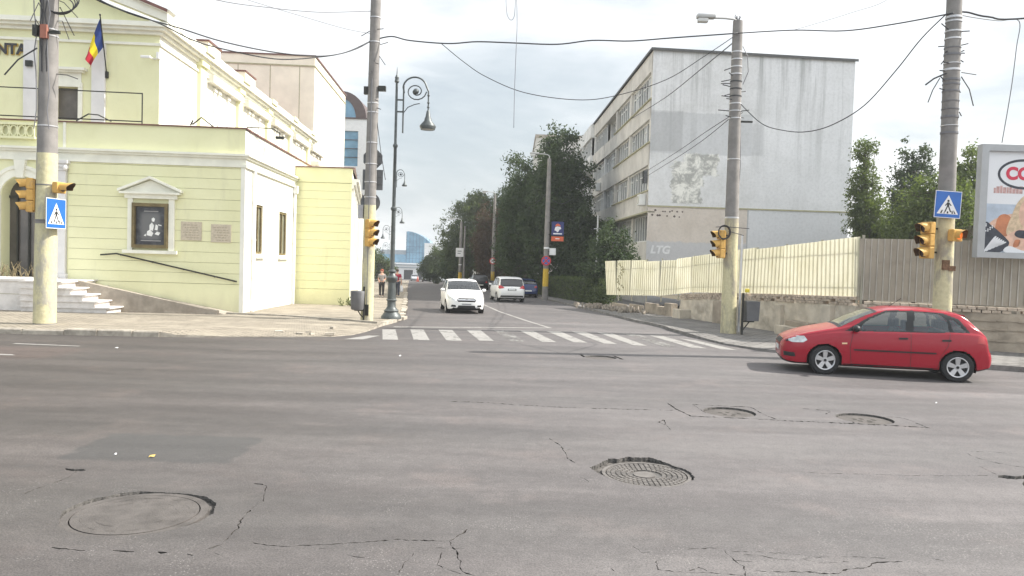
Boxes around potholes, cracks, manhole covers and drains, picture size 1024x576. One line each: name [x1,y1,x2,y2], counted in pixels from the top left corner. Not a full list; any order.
crack [254,529,474,576]
manhole cover [836,413,895,425]
manhole cover [602,462,692,487]
crack [51,483,267,556]
crack [451,401,928,429]
manhole cover [703,407,756,417]
manhole cover [59,491,216,537]
crack [612,547,902,576]
